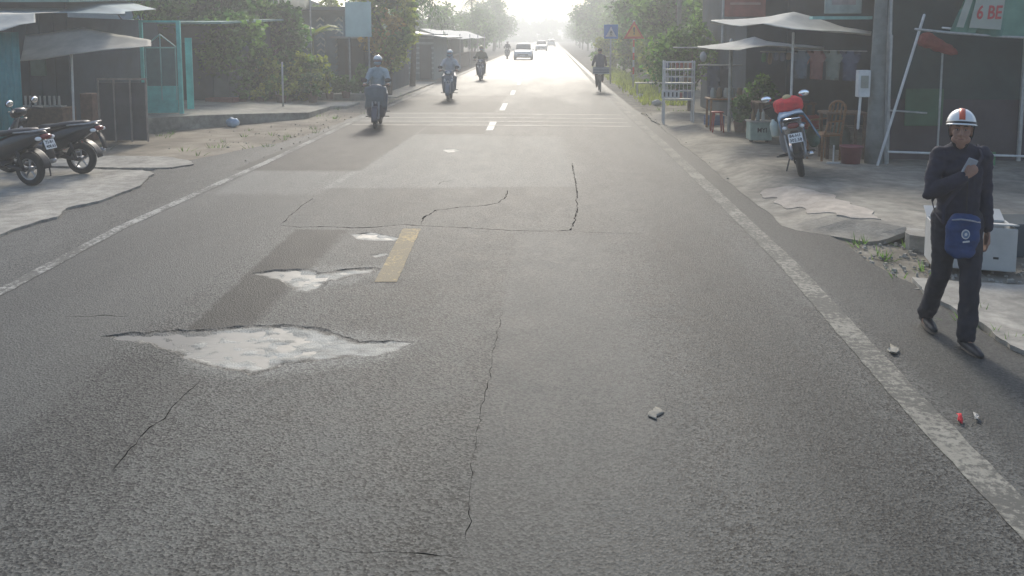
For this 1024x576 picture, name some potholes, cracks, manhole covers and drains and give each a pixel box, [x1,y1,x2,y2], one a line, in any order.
crack [281,163,624,234]
crack [328,548,471,560]
pothole [350,232,399,241]
pothole [252,267,382,292]
pothole [100,324,413,376]
crack [465,311,503,542]
crack [108,385,196,477]
